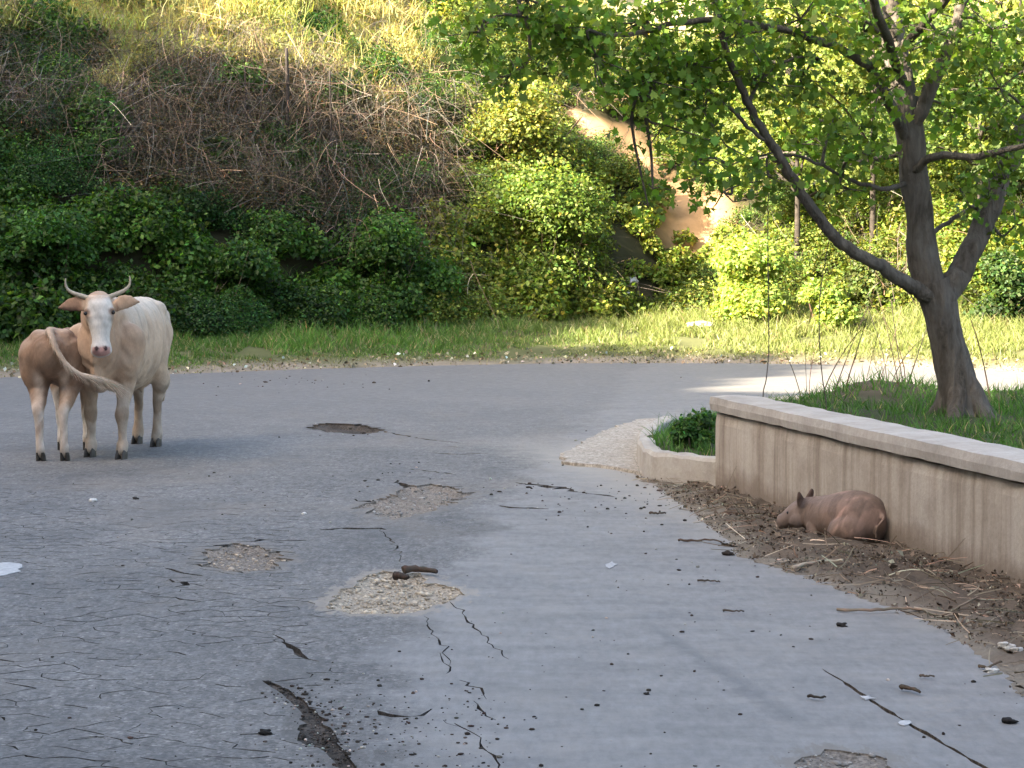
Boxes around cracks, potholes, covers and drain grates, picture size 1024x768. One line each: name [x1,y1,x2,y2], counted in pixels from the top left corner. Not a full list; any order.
pothole [325,570,465,614]
pothole [201,543,295,573]
pothole [306,423,385,434]
pothole [350,484,476,520]
crack [501,482,614,509]
crack [377,602,508,768]
crack [823,669,988,768]
pothole [794,749,891,768]
crack [0,483,402,768]
